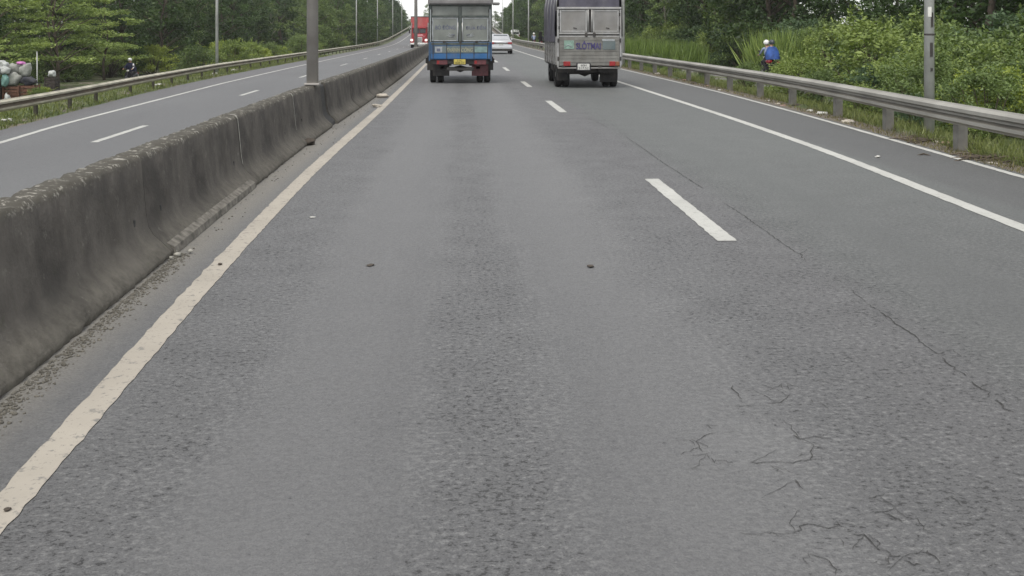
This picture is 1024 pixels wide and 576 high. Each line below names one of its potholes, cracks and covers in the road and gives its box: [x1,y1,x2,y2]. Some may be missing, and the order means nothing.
crack [731,366,842,406]
crack [851,289,1014,412]
crack [682,419,826,497]
crack [746,494,1001,574]
